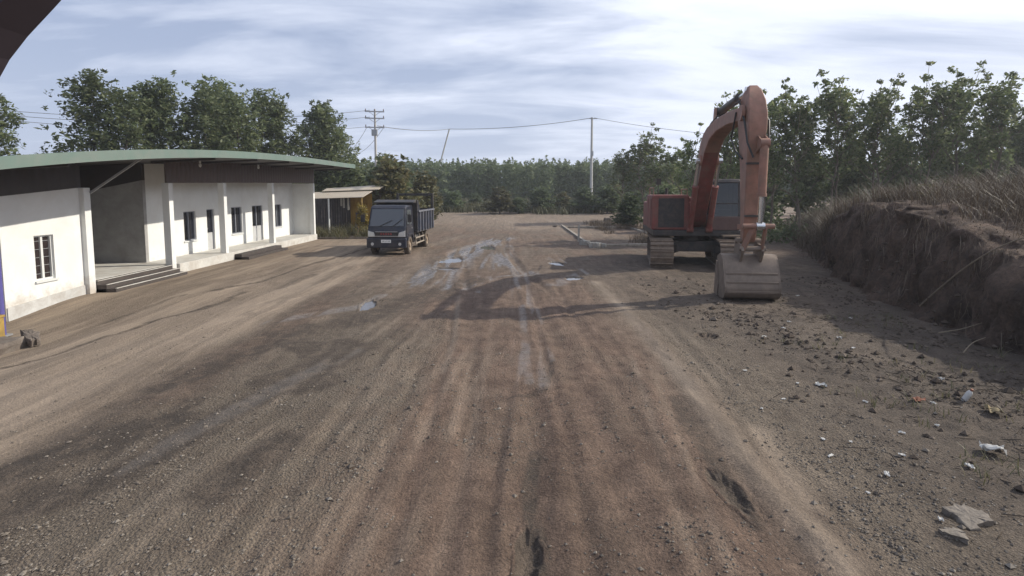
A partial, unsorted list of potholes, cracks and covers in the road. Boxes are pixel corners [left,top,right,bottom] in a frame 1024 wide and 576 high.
pothole [696,460,765,534]
pothole [431,256,468,265]
pothole [356,298,380,313]
